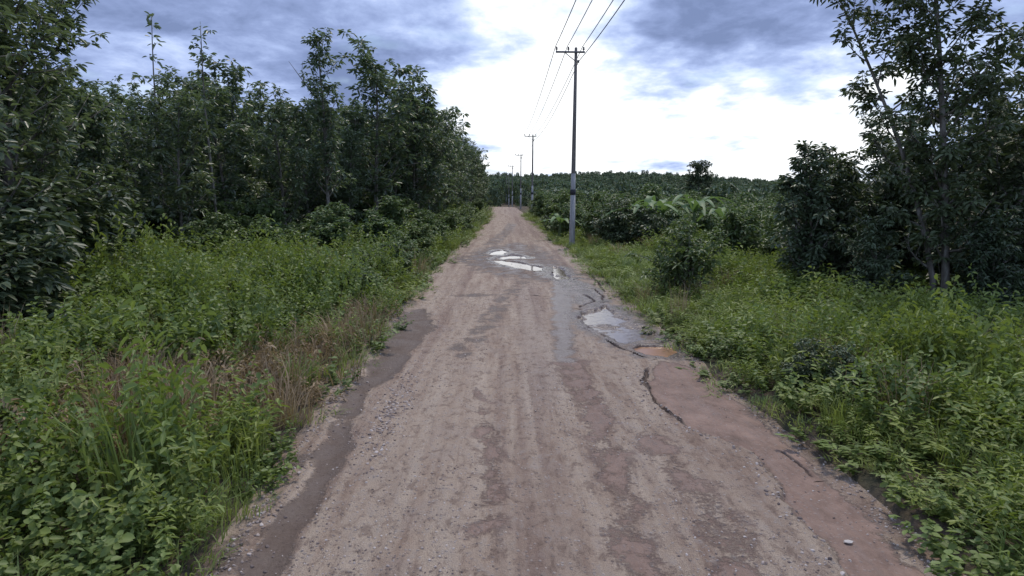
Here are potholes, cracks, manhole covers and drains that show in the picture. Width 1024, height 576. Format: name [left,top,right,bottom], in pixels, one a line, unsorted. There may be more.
pothole [484,259,555,272]
pothole [626,343,684,360]
crack [570,269,823,482]
pothole [569,304,676,347]
